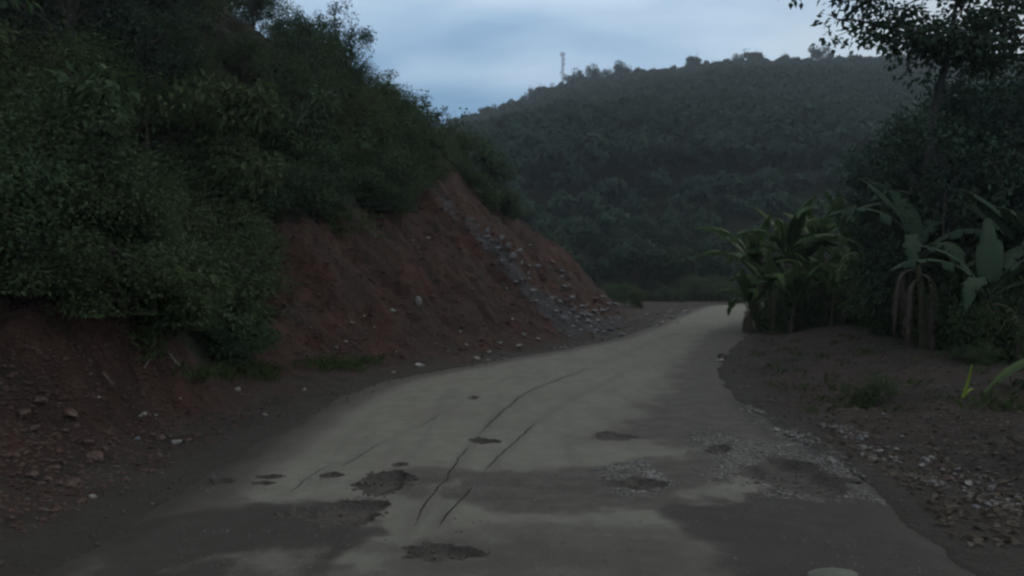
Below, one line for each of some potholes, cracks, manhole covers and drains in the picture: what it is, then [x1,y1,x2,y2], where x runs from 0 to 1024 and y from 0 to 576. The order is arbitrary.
pothole [401,541,492,564]
pothole [319,471,345,479]
pothole [702,443,734,455]
crack [414,370,583,527]
pothole [468,436,501,445]
pothole [592,430,644,441]
pothole [350,469,419,497]
pothole [602,476,673,492]
